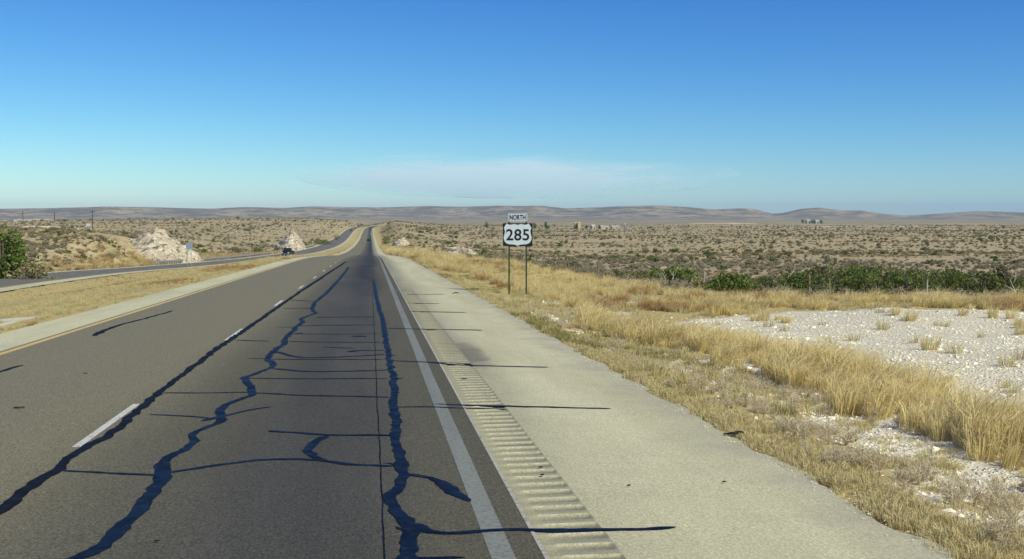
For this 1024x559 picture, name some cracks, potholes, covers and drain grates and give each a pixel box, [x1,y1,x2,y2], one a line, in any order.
crack [373,306,386,559]
